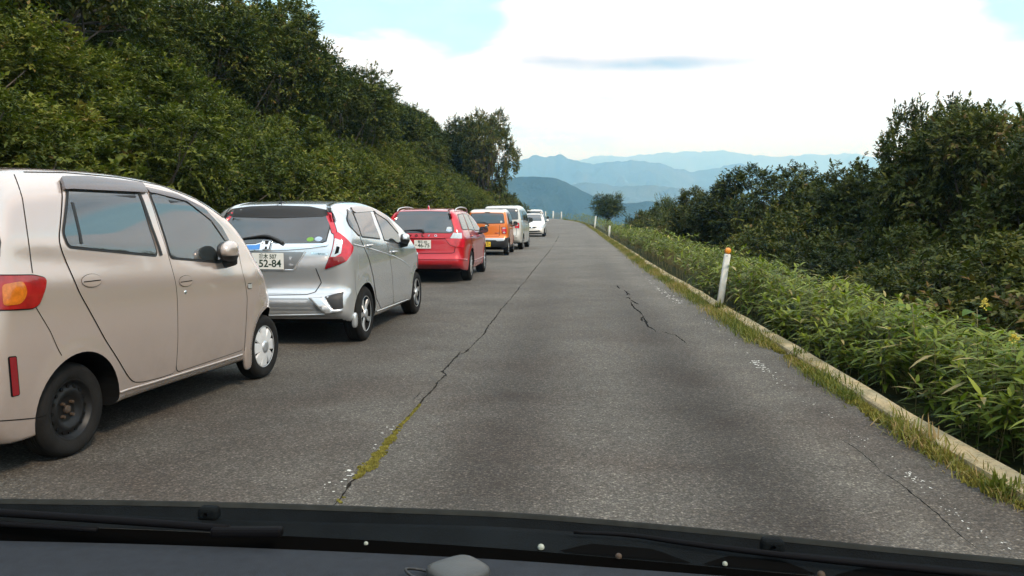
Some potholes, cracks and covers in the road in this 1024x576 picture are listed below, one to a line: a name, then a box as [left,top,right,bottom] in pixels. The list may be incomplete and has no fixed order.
crack [848,443,975,547]
crack [334,236,559,505]
crack [617,286,687,344]
